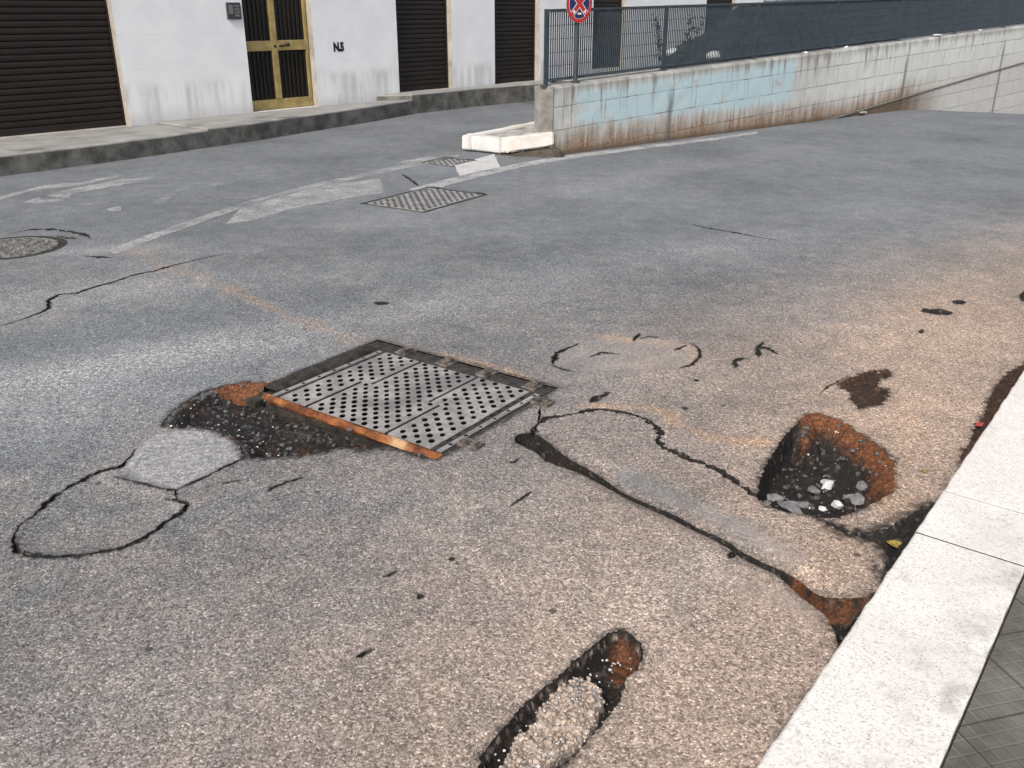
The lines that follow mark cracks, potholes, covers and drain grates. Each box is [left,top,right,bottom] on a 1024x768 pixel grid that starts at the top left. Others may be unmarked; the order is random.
pothole [819,370,891,409]
drain grate [420,157,477,167]
pothole [161,382,428,460]
crack [11,450,242,559]
crack [1,253,228,326]
pothole [756,413,895,518]
pothole [478,630,643,768]
crack [551,334,702,372]
crack [510,407,871,647]
drain grate [361,186,488,213]
